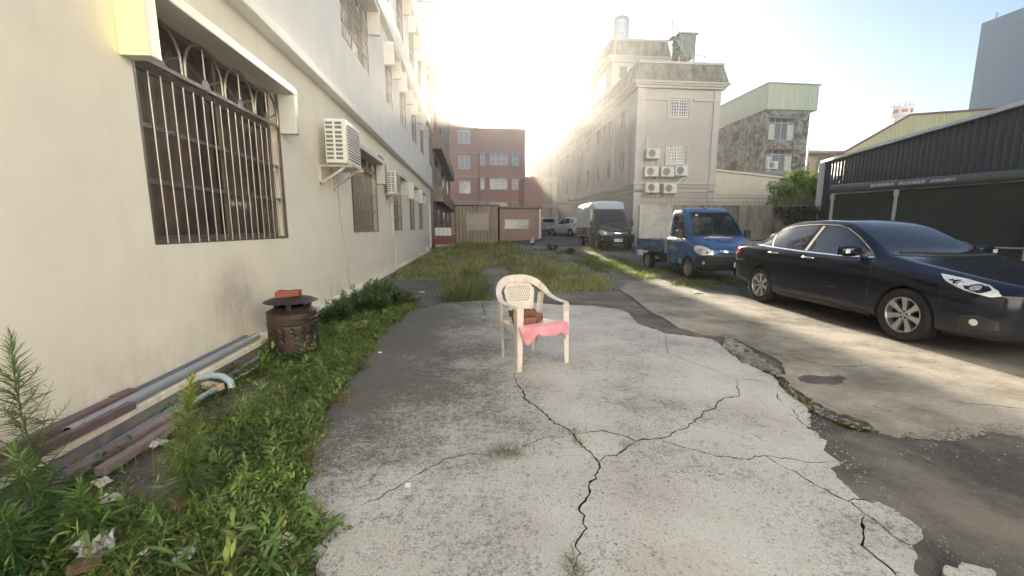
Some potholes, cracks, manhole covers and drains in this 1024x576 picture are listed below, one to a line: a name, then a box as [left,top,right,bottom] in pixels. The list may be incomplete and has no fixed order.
crack [363,337,910,575]
